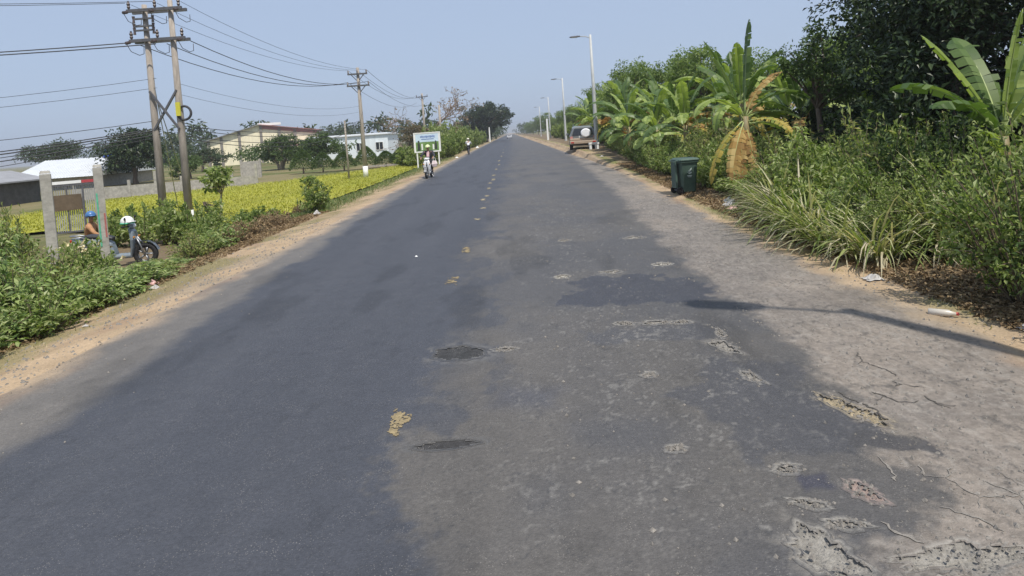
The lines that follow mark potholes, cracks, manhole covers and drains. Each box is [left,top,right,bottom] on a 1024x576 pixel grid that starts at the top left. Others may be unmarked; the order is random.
pothole [839,477,897,506]
crack [839,351,956,419]
pothole [781,495,838,512]
pothole [811,390,899,430]
pothole [408,437,485,452]
pothole [706,339,744,355]
pothole [429,344,488,362]
pothole [781,516,883,576]
crack [881,464,1024,543]
pothole [767,460,804,477]
pothole [662,442,691,454]
pothole [736,369,771,385]
